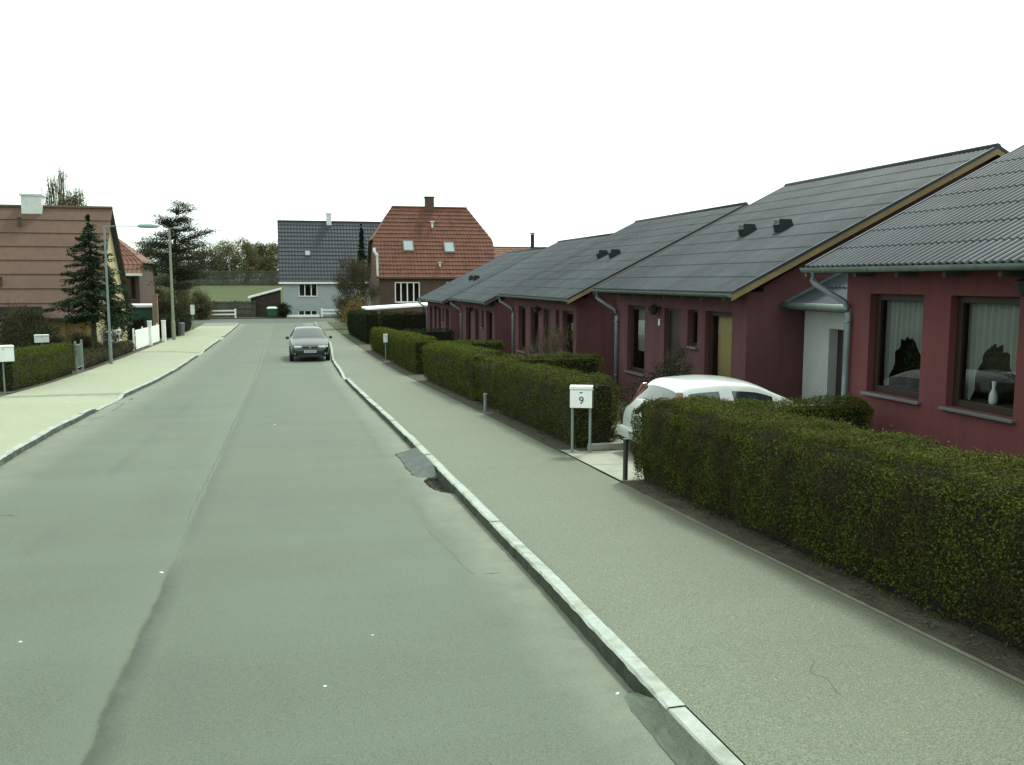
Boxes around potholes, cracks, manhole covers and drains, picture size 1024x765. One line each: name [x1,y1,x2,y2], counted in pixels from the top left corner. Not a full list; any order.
pothole [424,477,448,493]
